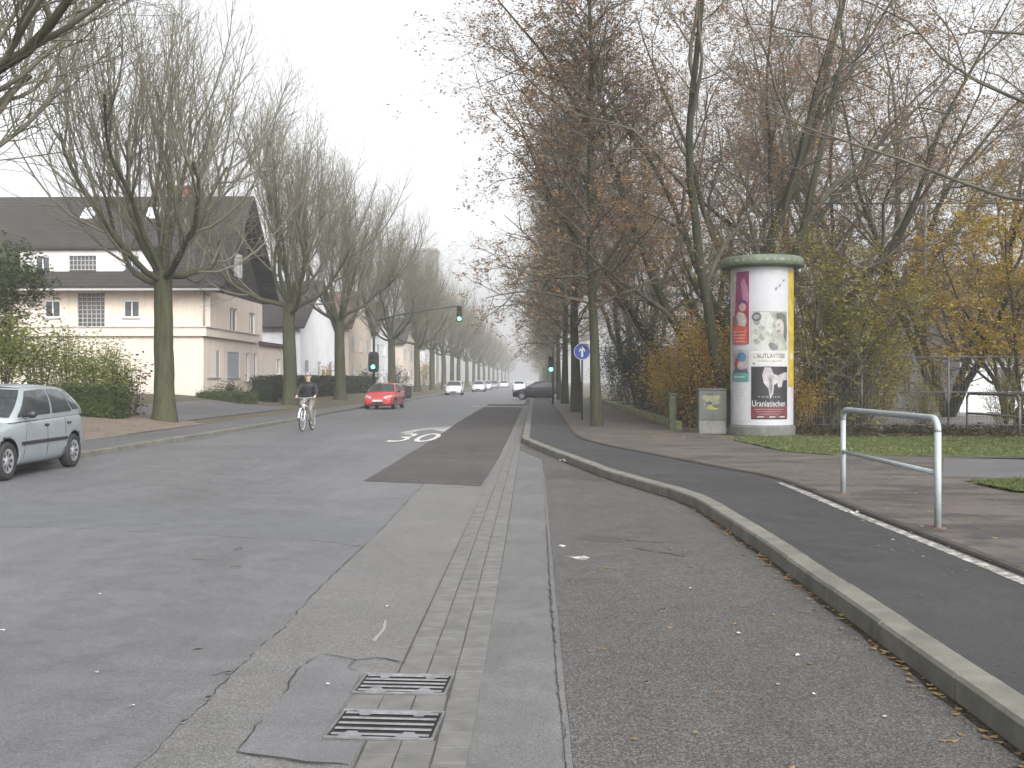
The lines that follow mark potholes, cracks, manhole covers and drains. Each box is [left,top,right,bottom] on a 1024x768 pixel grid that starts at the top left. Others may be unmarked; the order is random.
crack [286,653,402,691]
crack [135,630,281,768]
drain grate [351,672,454,695]
drain grate [323,708,445,741]
crack [237,719,350,765]
